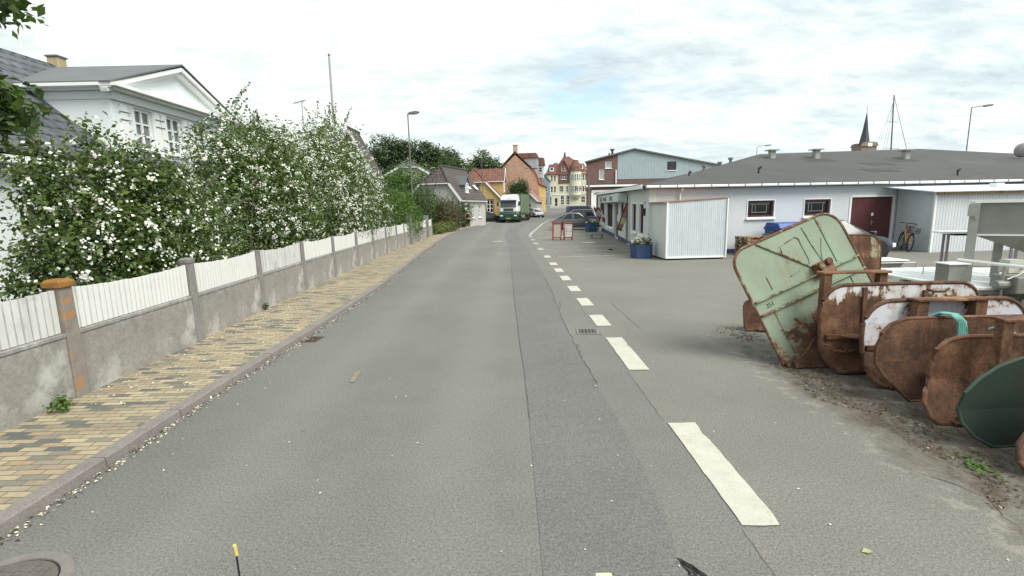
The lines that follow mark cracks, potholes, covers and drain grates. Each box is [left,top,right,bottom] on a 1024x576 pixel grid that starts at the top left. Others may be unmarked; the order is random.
manhole cover [0,551,76,576]
